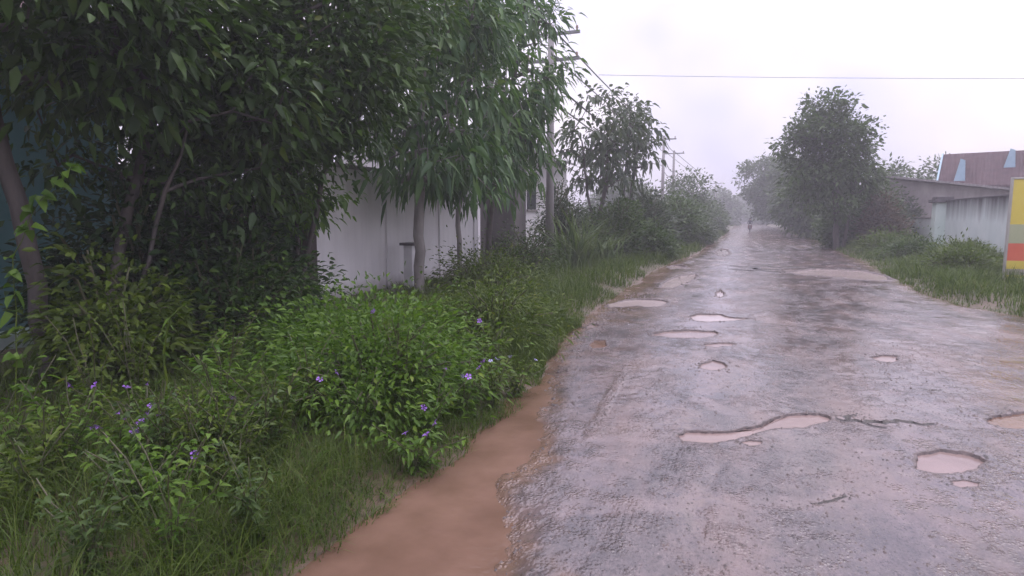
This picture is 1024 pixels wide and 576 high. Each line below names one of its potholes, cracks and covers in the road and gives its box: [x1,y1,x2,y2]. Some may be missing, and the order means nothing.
pothole [910,448,991,475]
pothole [982,411,1024,430]
pothole [786,268,897,281]
crack [811,496,848,505]
pothole [658,273,700,288]
pothole [588,339,608,348]
pothole [649,329,720,339]
pothole [606,298,670,308]
pothole [697,359,728,371]
pothole [675,412,834,444]
pothole [713,248,733,257]
pothole [949,479,983,488]
